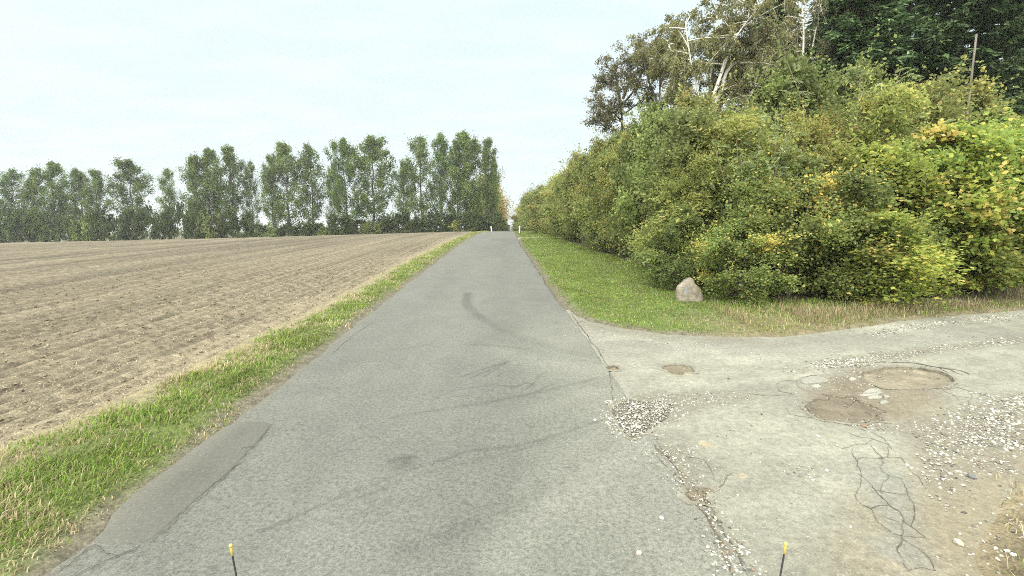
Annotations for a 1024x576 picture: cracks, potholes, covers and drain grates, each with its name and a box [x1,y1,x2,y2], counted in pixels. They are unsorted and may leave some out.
pothole [677,482,719,508]
pothole [657,363,699,376]
pothole [856,365,960,390]
pothole [799,393,893,425]
crack [835,433,936,571]
crack [656,449,732,510]
